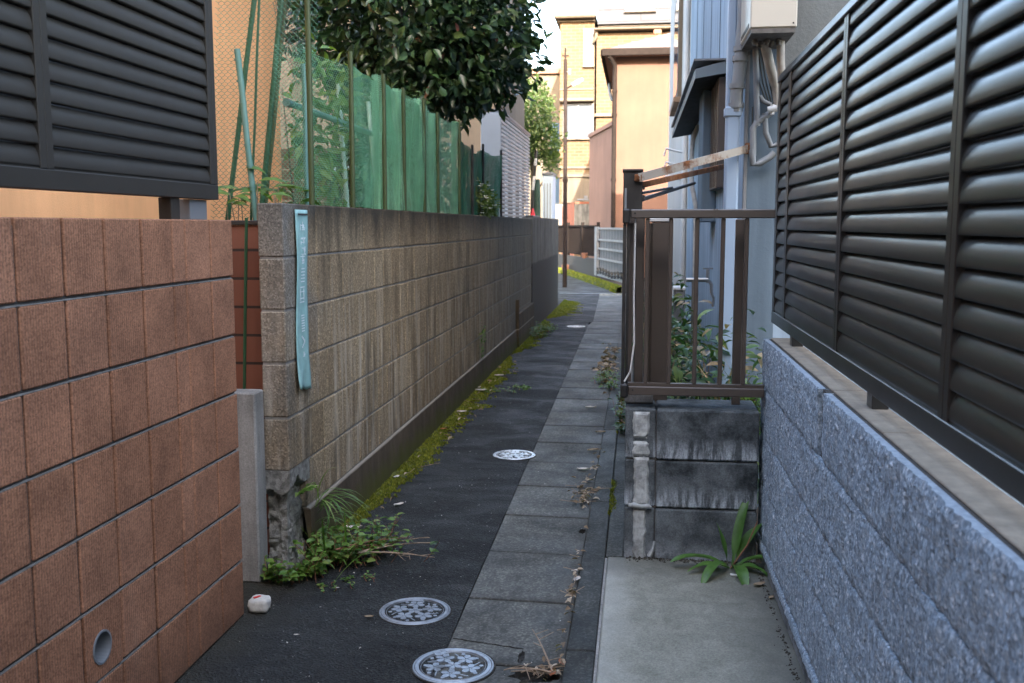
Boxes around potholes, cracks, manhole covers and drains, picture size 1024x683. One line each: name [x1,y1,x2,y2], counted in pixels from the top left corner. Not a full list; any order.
manhole cover [492,450,536,462]
manhole cover [410,648,496,683]
manhole cover [377,597,452,626]
